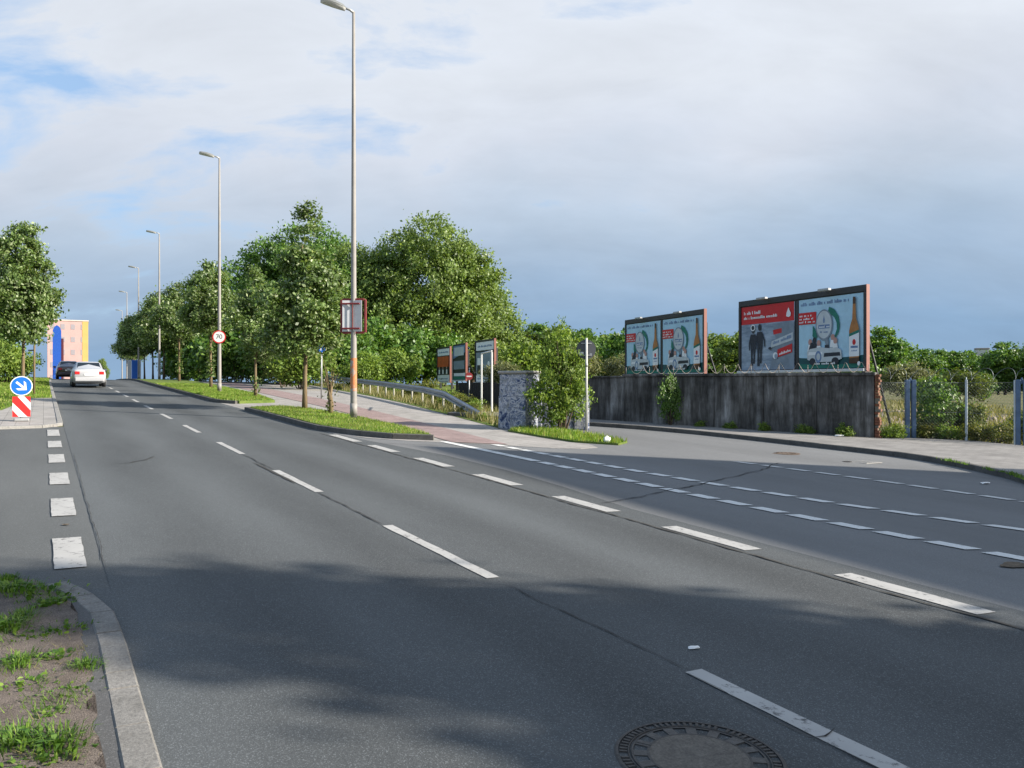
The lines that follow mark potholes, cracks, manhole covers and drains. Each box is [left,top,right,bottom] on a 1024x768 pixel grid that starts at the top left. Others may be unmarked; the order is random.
manhole cover [614,721,788,768]
crack [599,462,780,504]
